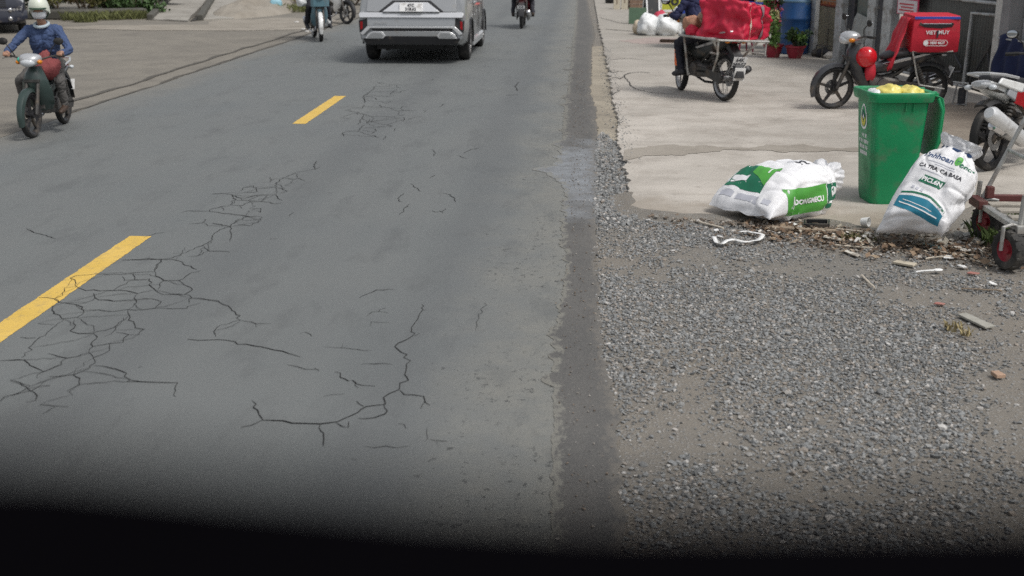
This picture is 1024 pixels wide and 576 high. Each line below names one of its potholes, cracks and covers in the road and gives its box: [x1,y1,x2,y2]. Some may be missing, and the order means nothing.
crack [0,171,305,413]
crack [242,304,428,446]
crack [340,82,443,139]
